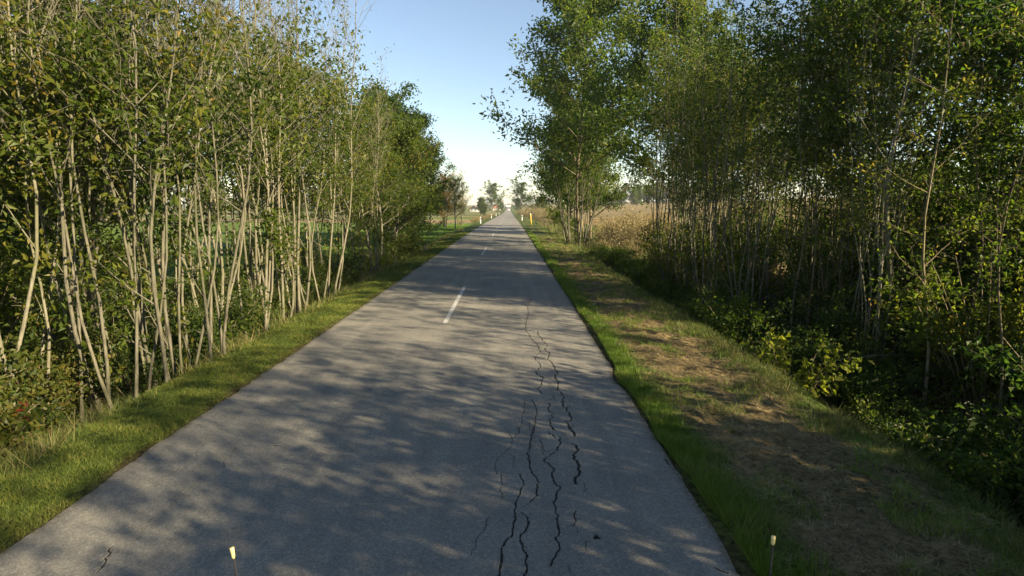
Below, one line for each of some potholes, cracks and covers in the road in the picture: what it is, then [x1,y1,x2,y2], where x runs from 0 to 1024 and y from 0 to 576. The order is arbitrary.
crack [96,547,112,573]
